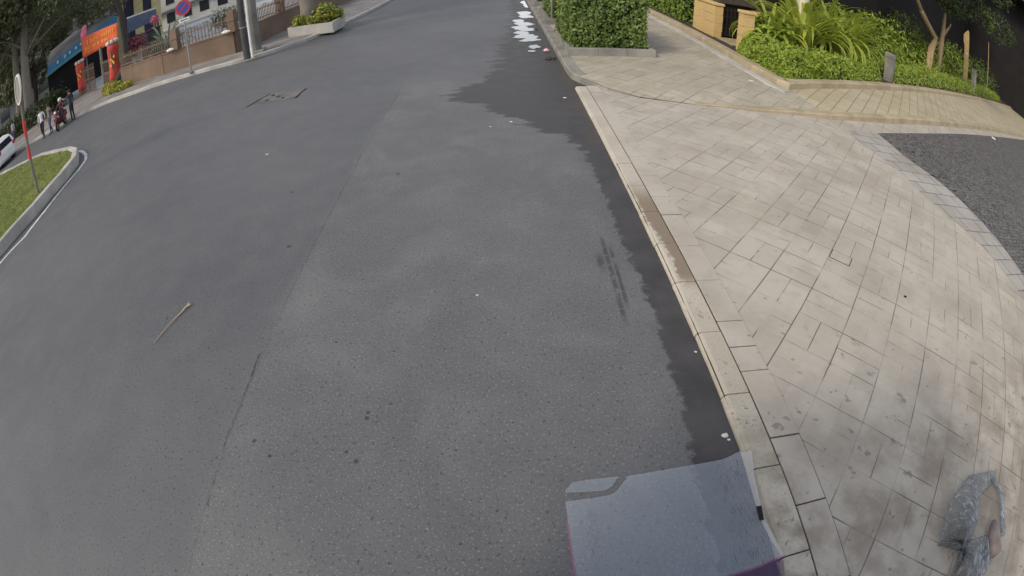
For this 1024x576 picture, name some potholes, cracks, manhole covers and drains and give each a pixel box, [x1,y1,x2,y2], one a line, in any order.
manhole cover [247,88,307,107]
